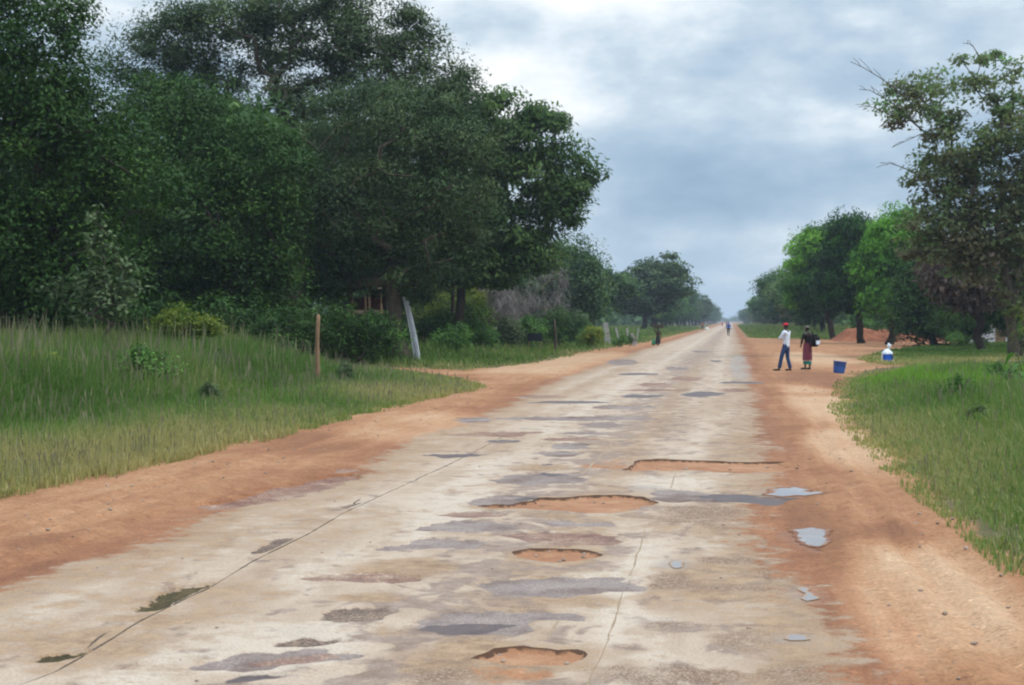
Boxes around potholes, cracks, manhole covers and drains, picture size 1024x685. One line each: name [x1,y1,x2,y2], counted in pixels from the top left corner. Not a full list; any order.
pothole [622,459,799,473]
pothole [464,494,542,506]
pothole [478,495,659,513]
pothole [511,548,603,562]
crack [546,473,676,685]
crack [20,437,502,685]
pothole [472,646,588,666]
